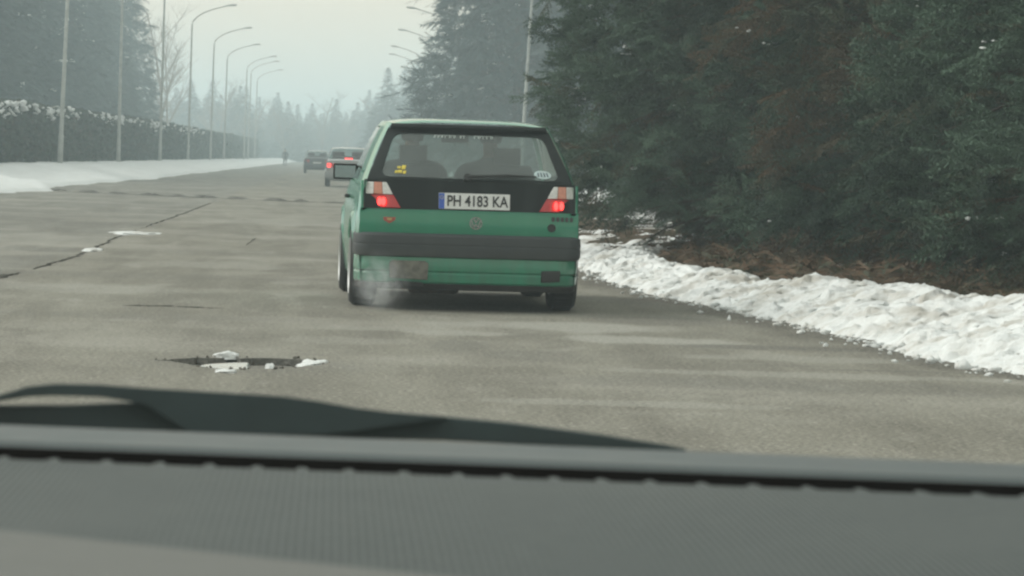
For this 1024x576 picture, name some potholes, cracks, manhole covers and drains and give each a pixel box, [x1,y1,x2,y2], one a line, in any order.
crack [0,188,345,279]
pothole [155,355,330,370]
